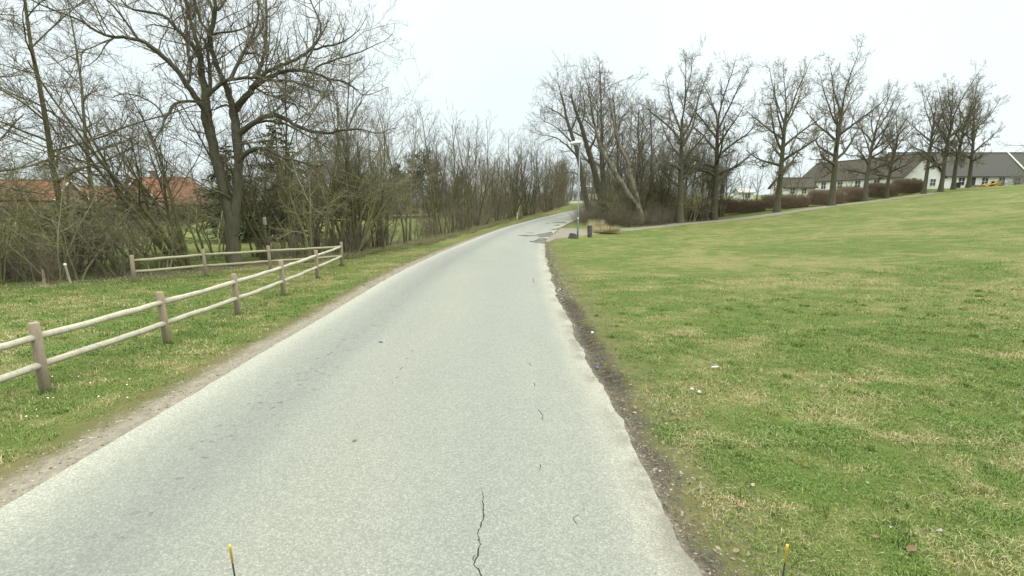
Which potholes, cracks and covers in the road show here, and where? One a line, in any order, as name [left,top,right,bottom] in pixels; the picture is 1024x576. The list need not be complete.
crack [472,492,485,576]
